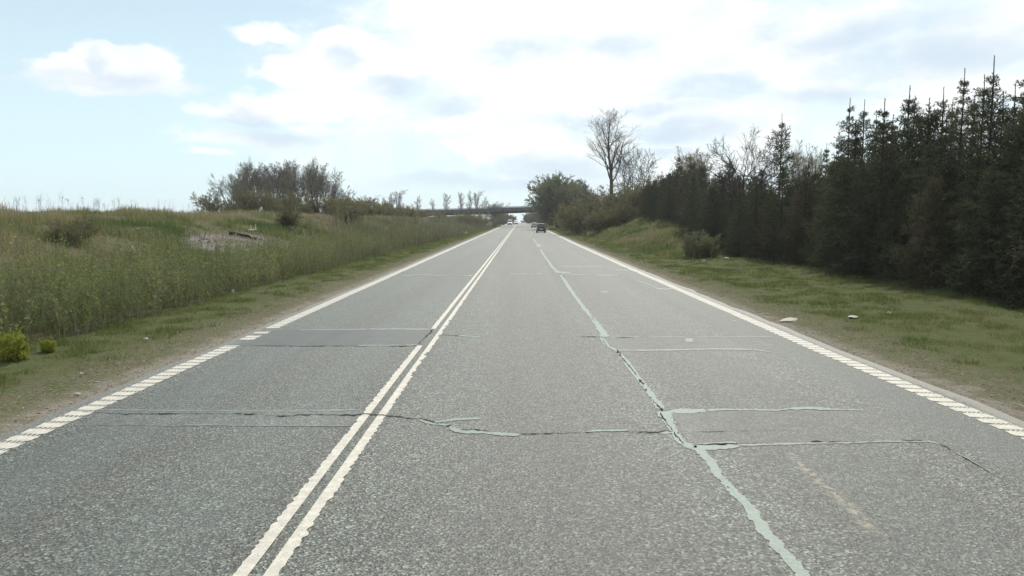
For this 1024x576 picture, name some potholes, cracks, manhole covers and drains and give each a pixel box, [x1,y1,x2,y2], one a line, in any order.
crack [84,411,670,436]
